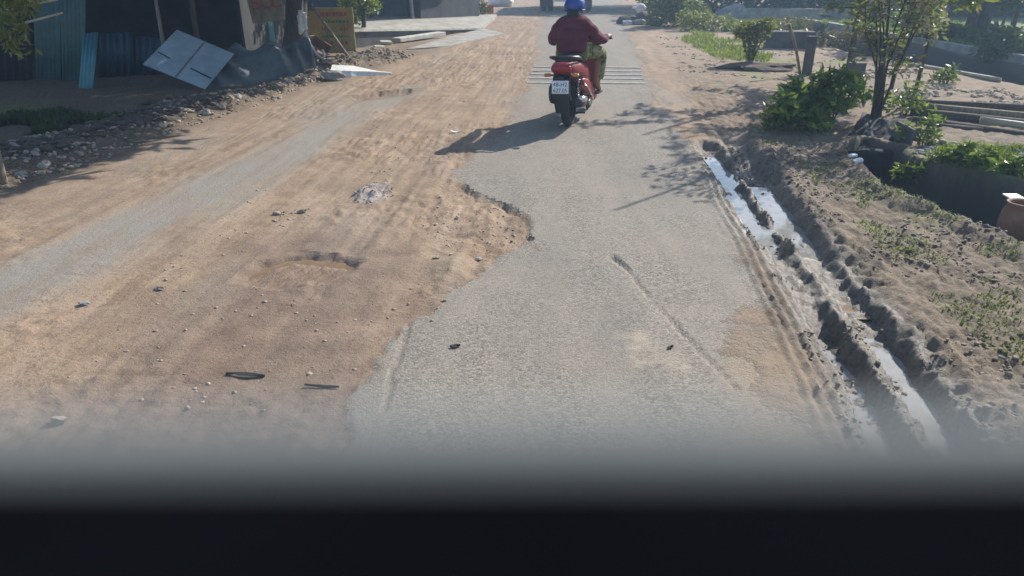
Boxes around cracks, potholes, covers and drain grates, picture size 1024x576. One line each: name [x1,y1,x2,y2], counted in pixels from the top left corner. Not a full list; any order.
pothole [226,250,371,291]
crack [612,259,740,388]
